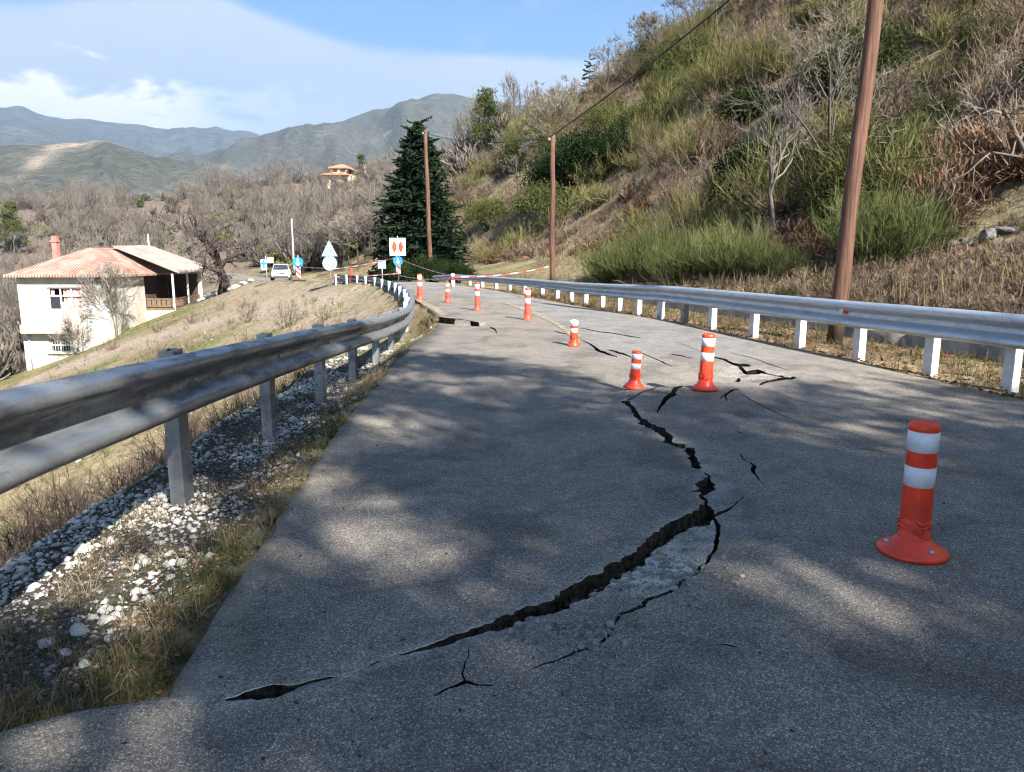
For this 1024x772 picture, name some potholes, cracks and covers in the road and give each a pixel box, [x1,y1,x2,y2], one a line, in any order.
crack [438,316,497,334]
crack [225,328,802,701]
